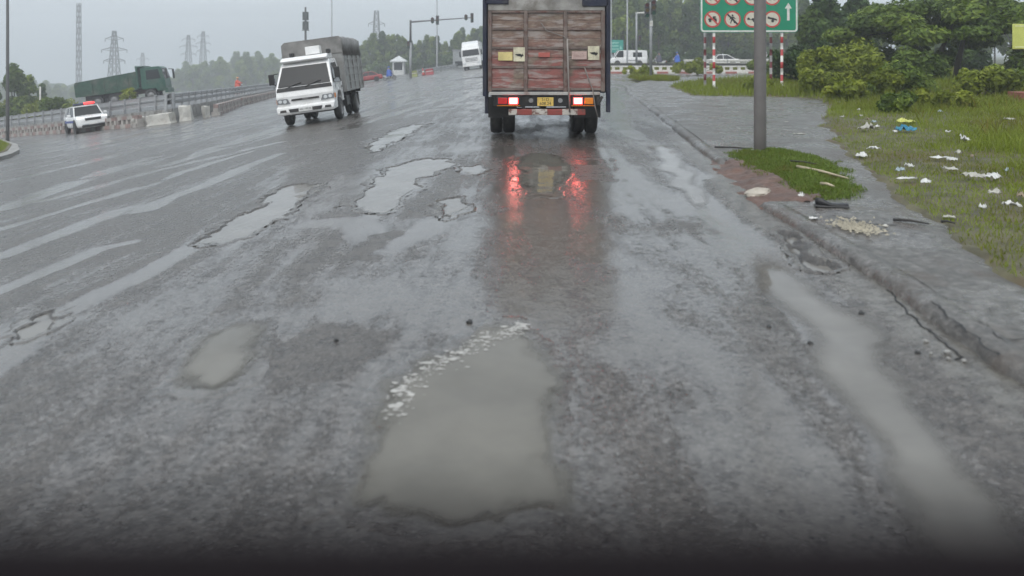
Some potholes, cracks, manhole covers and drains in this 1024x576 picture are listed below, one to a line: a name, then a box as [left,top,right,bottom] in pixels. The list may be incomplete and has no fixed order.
pothole [0,305,76,345]
pothole [360,123,434,153]
pothole [188,182,330,249]
pothole [332,157,462,216]
pothole [424,195,477,222]
pothole [300,316,598,508]
pothole [152,316,283,404]
crack [886,289,1024,361]
pothole [509,153,579,199]
pothole [767,225,851,276]
